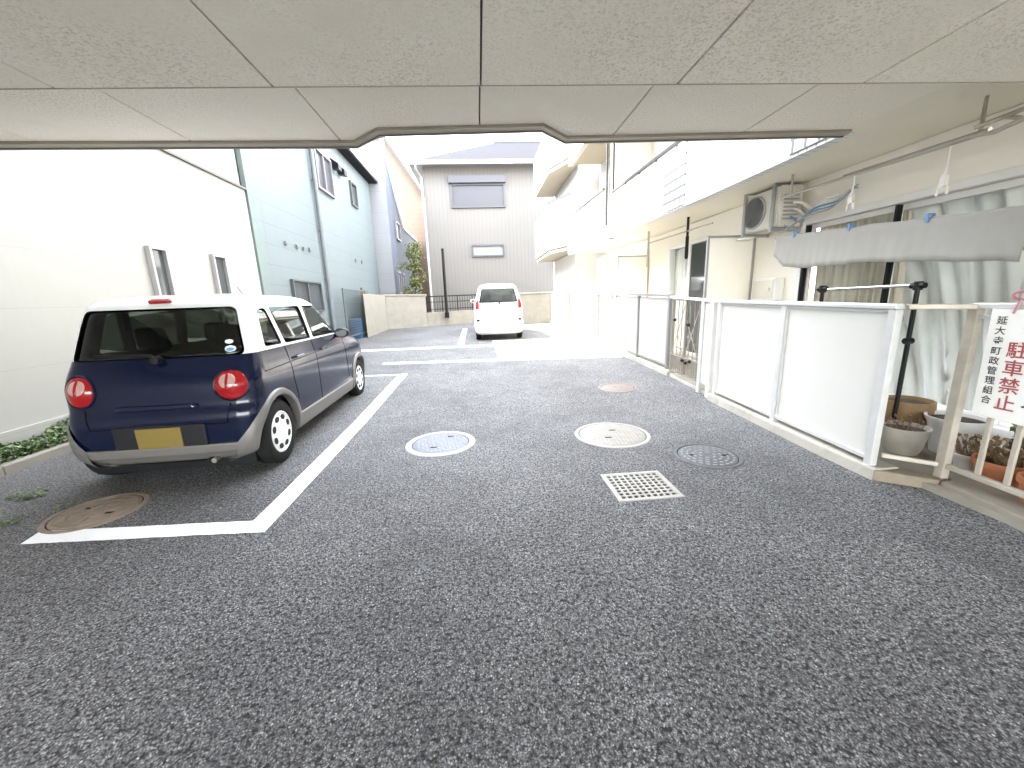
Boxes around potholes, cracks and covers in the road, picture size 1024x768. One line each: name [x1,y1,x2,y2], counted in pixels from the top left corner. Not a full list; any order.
manhole cover [37,492,150,534]
drain grate [600,470,685,502]
manhole cover [598,383,637,392]
manhole cover [673,444,744,469]
manhole cover [575,422,651,448]
manhole cover [405,431,475,457]
